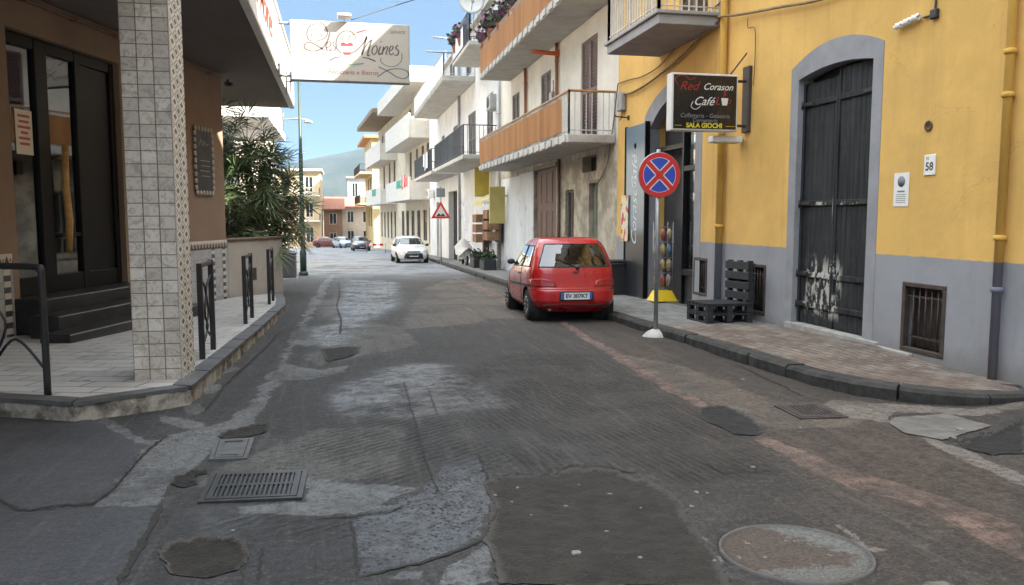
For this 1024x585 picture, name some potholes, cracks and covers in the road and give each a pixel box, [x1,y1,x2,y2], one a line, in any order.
drain grate [198,469,308,504]
drain grate [774,402,848,420]
manhole cover [209,437,255,462]
crack [403,382,440,494]
manhole cover [718,524,877,585]
